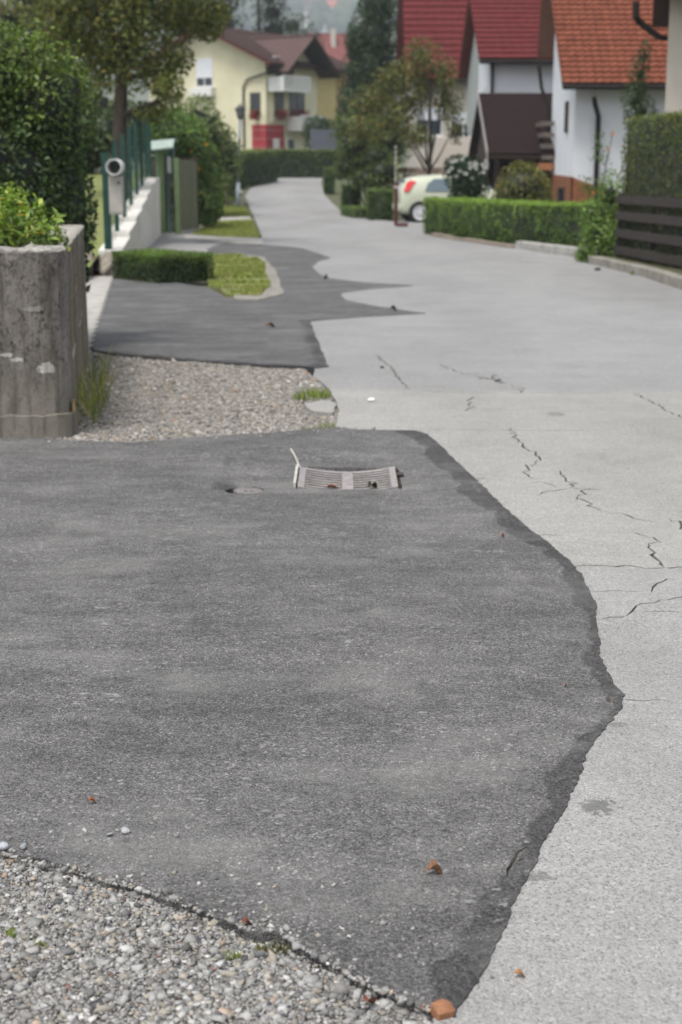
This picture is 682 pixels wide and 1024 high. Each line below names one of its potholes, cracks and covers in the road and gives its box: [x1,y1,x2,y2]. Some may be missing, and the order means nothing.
crack [439,364,525,393]
crack [509,428,682,619]
drain grate [290,448,404,489]
